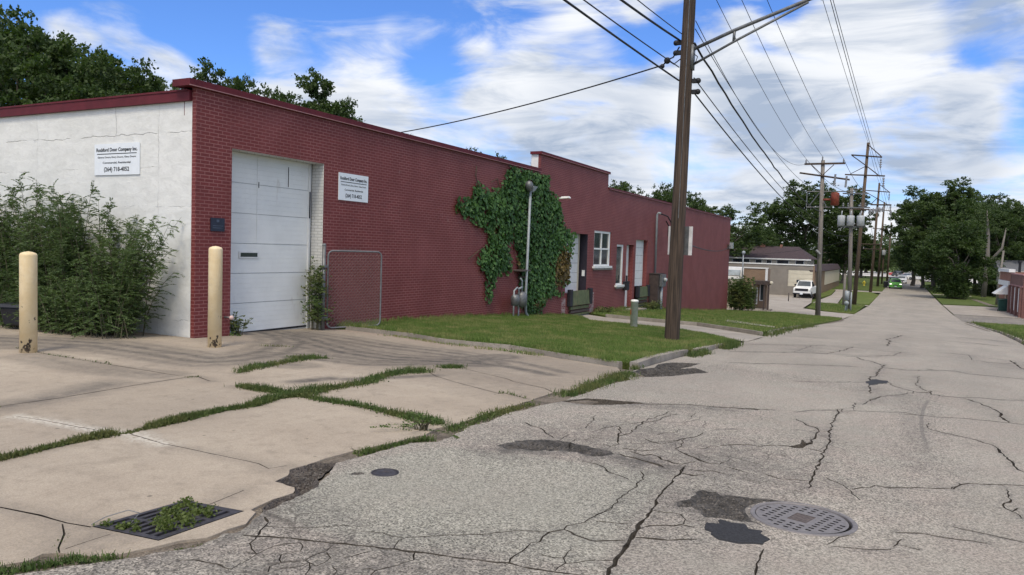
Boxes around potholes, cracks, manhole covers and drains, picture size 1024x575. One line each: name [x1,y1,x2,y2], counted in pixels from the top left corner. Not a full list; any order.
pothole [262,462,336,512]
drain grate [93,501,243,541]
crack [178,335,1024,575]
utility cover [371,468,399,477]
crack [58,525,110,553]
manhole cover [750,501,858,537]
